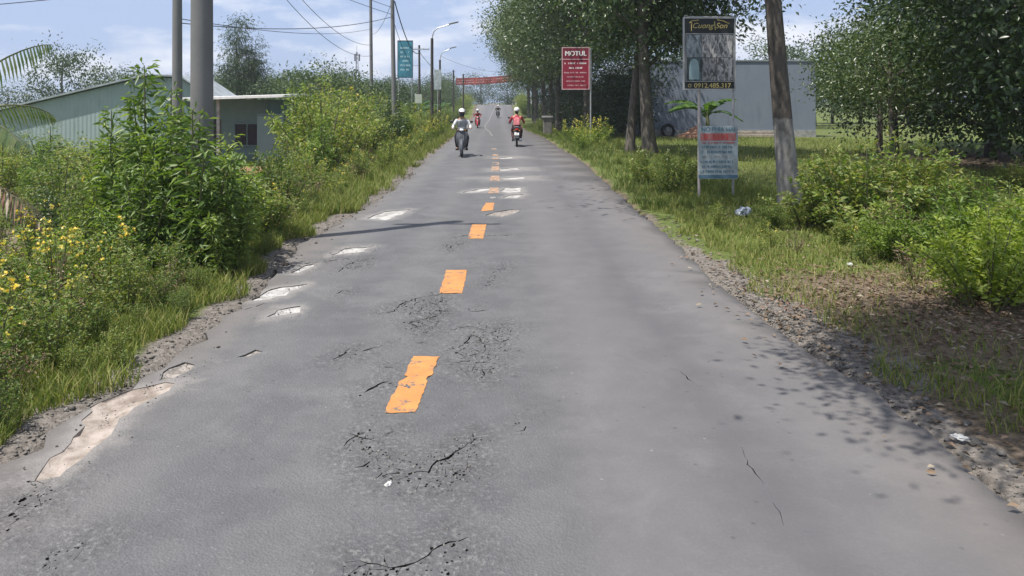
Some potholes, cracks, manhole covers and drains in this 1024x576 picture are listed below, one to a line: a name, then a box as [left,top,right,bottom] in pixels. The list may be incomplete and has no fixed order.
pothole [34,382,174,482]
pothole [487,209,520,217]
pothole [252,284,306,301]
crack [452,309,511,379]
pothole [161,362,194,380]
pothole [267,306,300,317]
crack [344,268,501,491]
crack [343,534,468,576]
pothole [333,246,372,255]
pothole [369,209,410,220]
